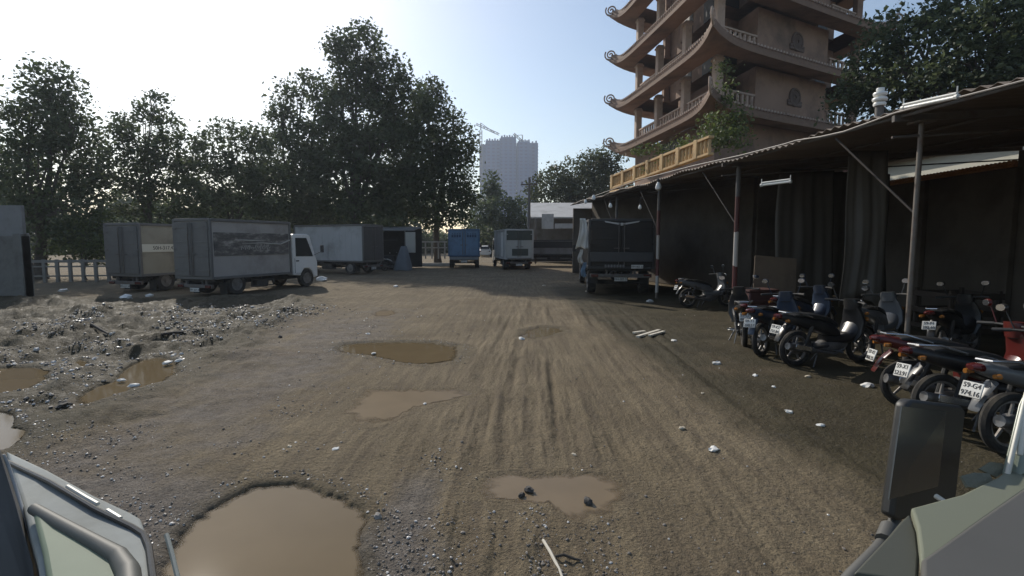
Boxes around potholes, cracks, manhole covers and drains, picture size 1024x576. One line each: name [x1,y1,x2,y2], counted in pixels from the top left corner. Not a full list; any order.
pothole [56,352,200,410]
pothole [0,362,82,394]
pothole [323,384,489,429]
pothole [0,405,48,454]
pothole [509,324,579,341]
pothole [153,475,384,576]
pothole [461,467,642,529]
pothole [323,339,477,367]
